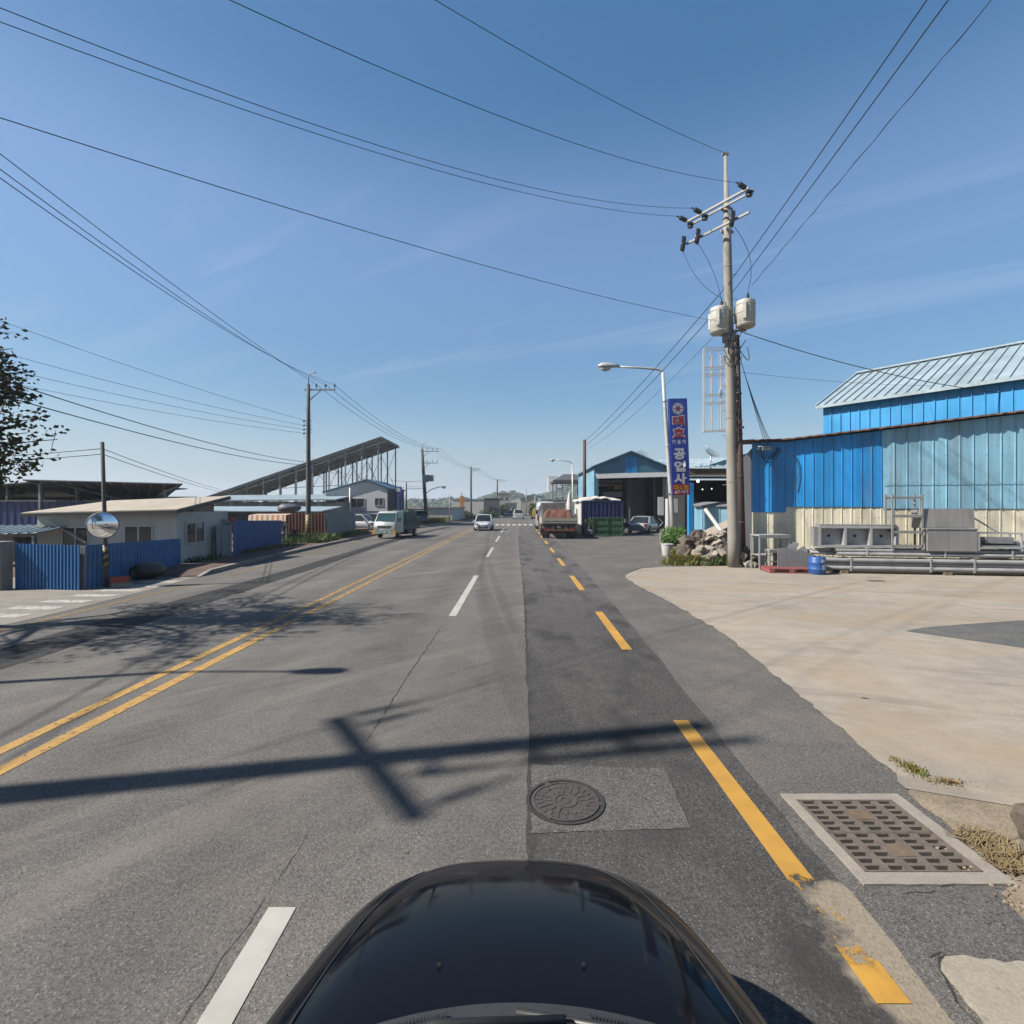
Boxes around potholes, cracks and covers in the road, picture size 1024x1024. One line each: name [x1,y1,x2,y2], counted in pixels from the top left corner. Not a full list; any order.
crack [359,629,440,750]
drain grate [780,793,1016,887]
manhole cover [526,779,605,825]
crack [179,821,315,1023]
